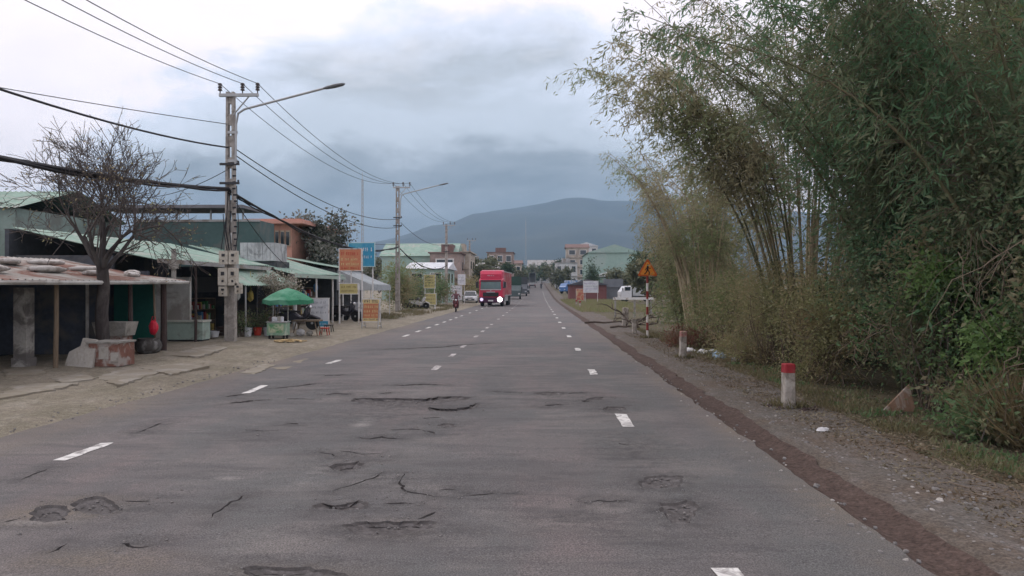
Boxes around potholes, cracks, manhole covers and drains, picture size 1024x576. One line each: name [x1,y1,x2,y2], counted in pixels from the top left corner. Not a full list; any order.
crack [212,495,244,517]
pothole [351,396,471,406]
pothole [243,566,348,576]
pothole [659,500,700,523]
pothole [312,500,368,511]
pothole [70,496,121,515]
pothole [638,475,684,489]
pothole [341,521,437,536]
crack [386,474,505,519]
pothole [28,505,71,523]
pothole [428,403,480,413]
pothole [329,461,365,471]
